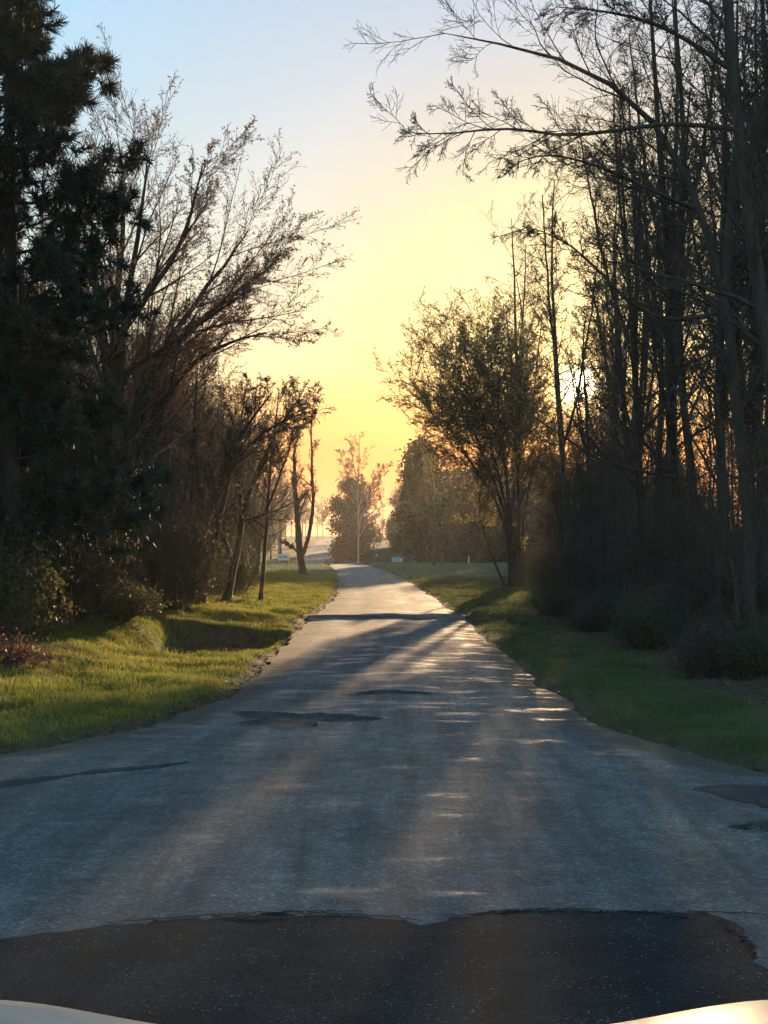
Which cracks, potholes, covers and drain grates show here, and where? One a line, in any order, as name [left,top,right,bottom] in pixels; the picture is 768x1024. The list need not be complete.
pothole [719,820,768,832]
pothole [222,710,396,732]
